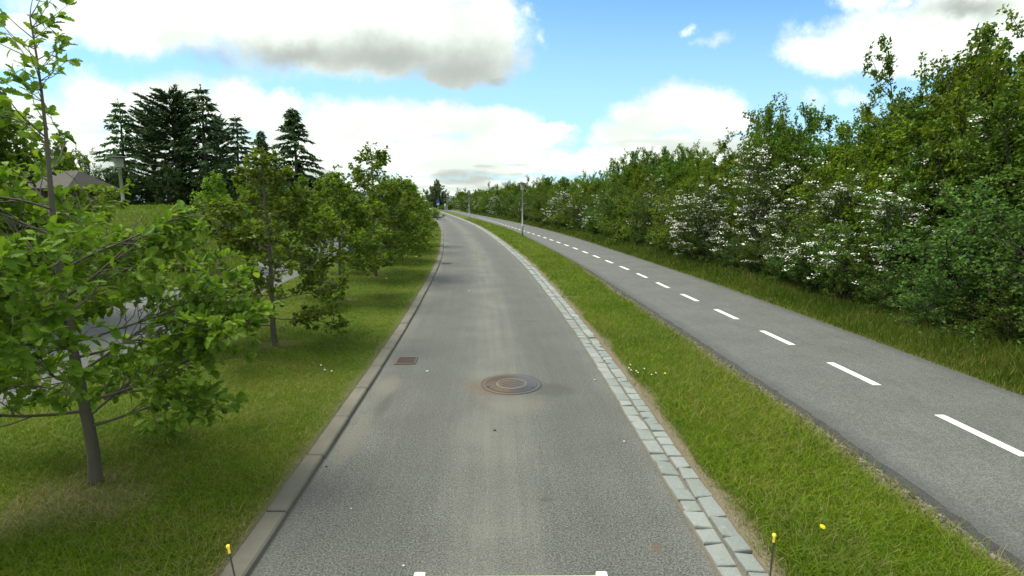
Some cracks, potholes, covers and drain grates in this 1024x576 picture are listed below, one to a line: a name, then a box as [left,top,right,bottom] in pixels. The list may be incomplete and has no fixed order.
drain grate [394,357,418,365]
manhole cover [481,374,542,395]
